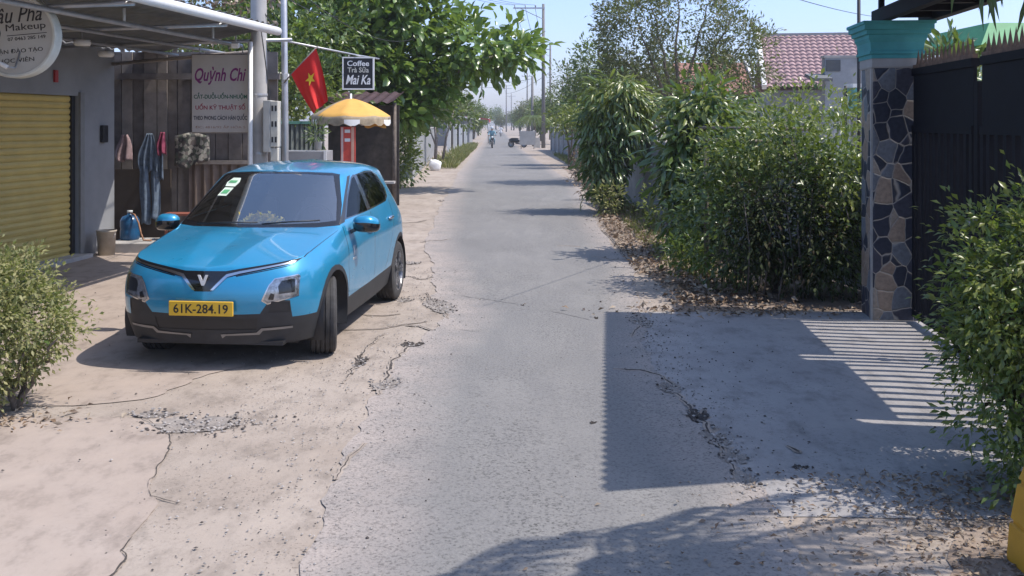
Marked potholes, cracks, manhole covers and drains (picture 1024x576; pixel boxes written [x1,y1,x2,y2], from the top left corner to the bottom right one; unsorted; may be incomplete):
pothole [128,407,180,418]
crack [341,275,468,395]
crack [333,443,367,480]
crack [613,368,739,475]
crack [109,537,132,576]
pothole [132,411,254,433]
crack [110,415,178,503]
